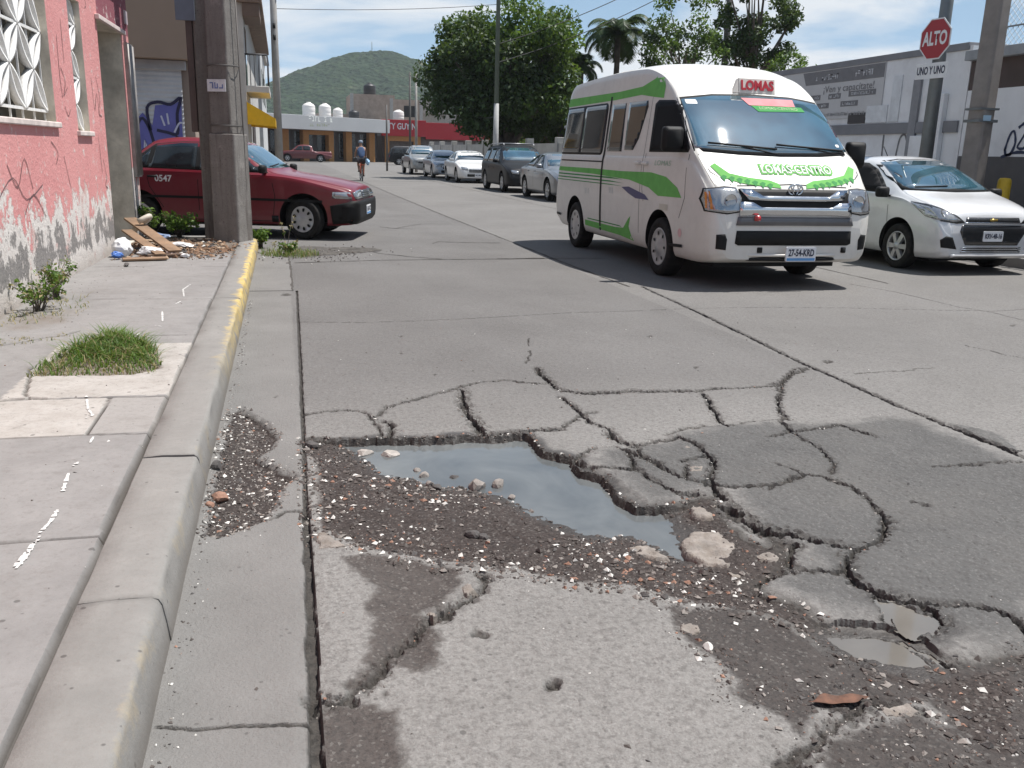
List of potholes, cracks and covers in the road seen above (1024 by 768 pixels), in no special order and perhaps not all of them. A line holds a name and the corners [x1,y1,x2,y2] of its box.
crack [307,287,1024,669]
pothole [300,433,1024,768]
pothole [196,406,304,539]
